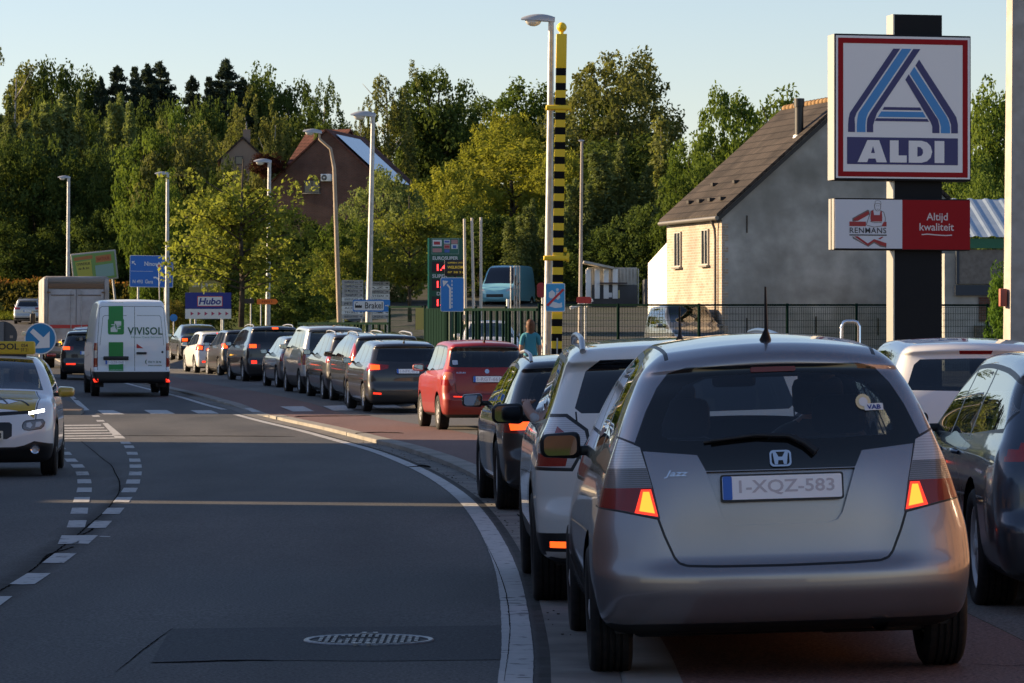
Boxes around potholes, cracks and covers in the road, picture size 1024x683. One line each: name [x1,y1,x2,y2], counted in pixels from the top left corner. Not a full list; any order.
manhole cover [304,632,434,646]
